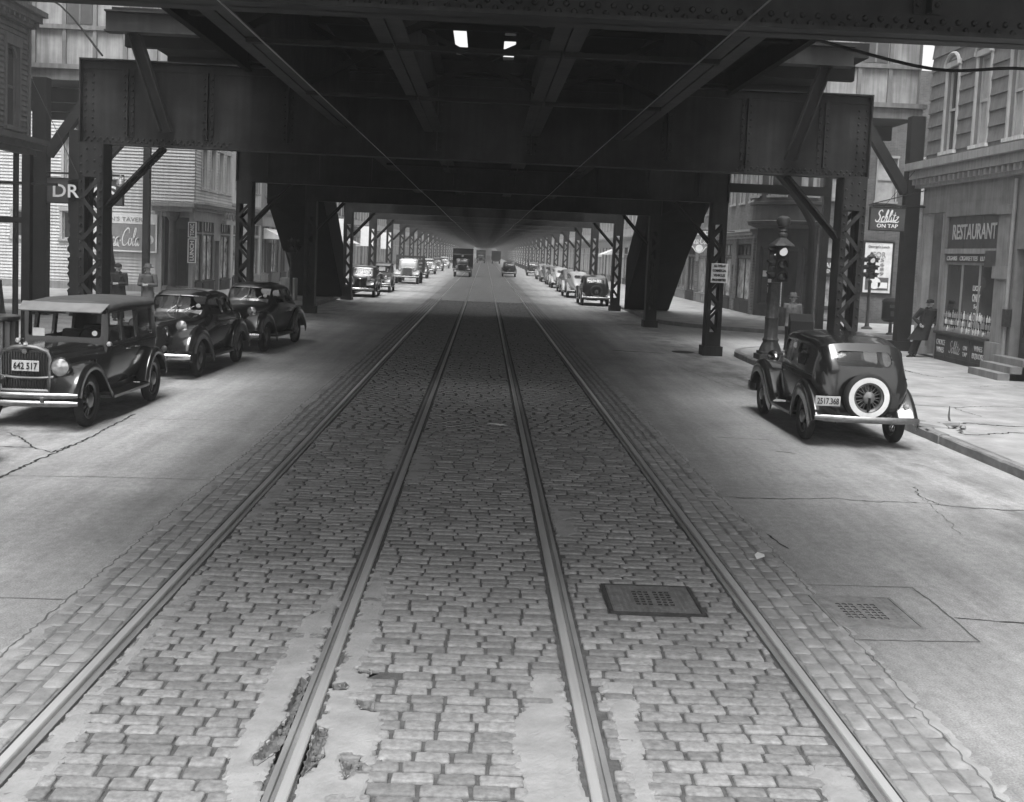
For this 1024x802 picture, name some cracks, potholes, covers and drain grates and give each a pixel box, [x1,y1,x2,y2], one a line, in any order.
crack [737,487,1015,534]
manhole cover [600,583,706,618]
pothole [300,726,328,777]
pothole [339,753,373,780]
crack [0,414,135,478]
crack [920,396,1024,435]
pothole [251,677,309,766]
